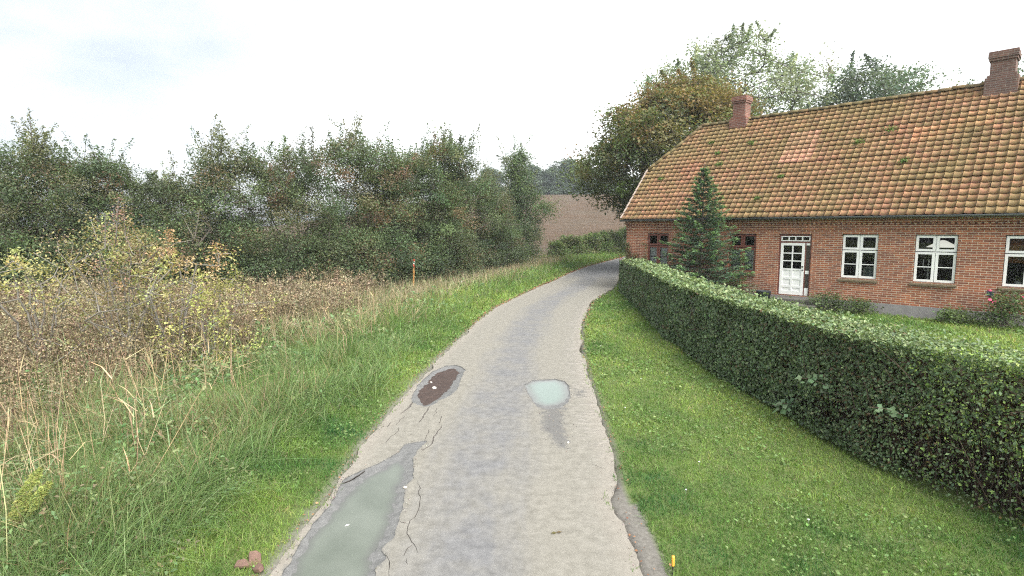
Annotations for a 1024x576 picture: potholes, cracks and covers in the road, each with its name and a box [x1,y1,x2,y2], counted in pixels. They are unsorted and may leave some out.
crack [386,402,442,452]
crack [385,484,421,569]
pothole [524,379,571,409]
pothole [411,365,465,407]
